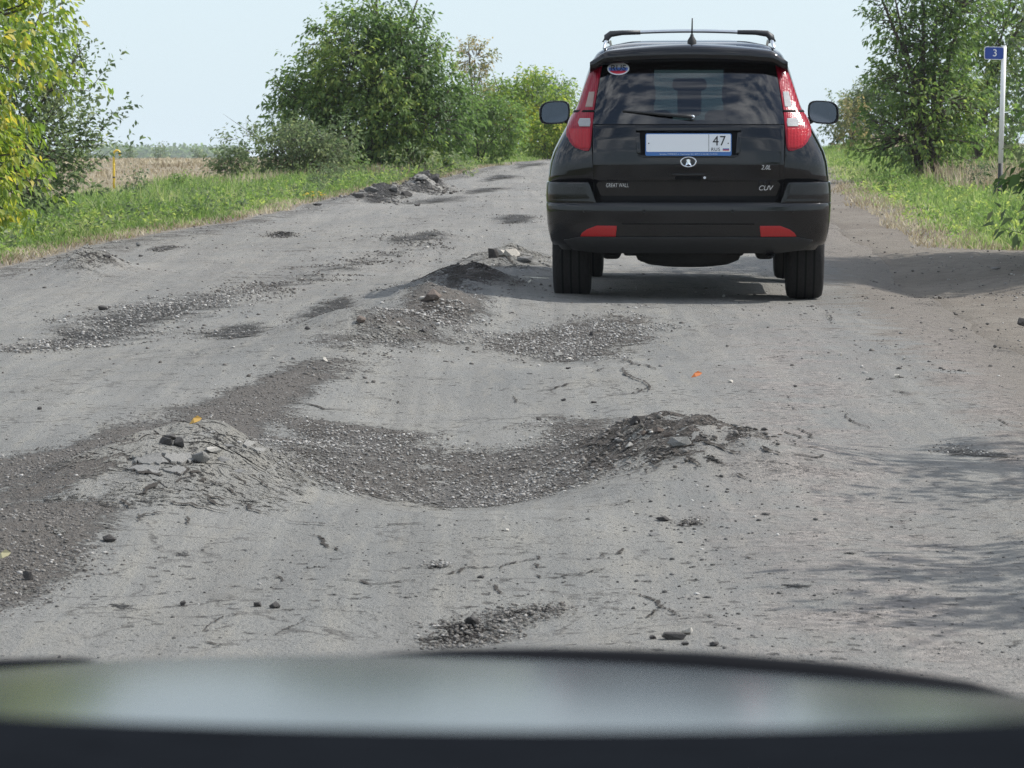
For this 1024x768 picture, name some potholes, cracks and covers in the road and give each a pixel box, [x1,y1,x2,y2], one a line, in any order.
pothole [210,413,679,510]
pothole [927,440,1019,459]
crack [513,358,654,405]
pothole [438,310,691,363]
pothole [0,283,299,354]
pothole [274,295,359,325]
pothole [486,214,543,224]
pothole [401,599,587,650]
